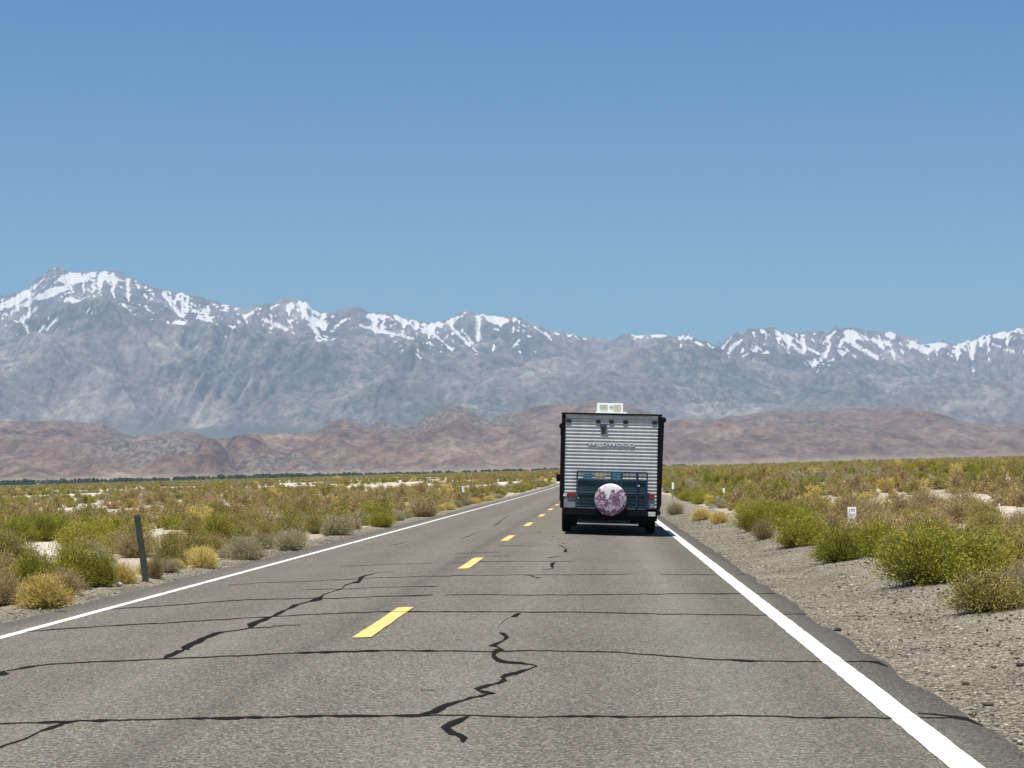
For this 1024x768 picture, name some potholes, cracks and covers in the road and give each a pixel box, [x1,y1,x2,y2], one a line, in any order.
crack [28,515,784,632]
